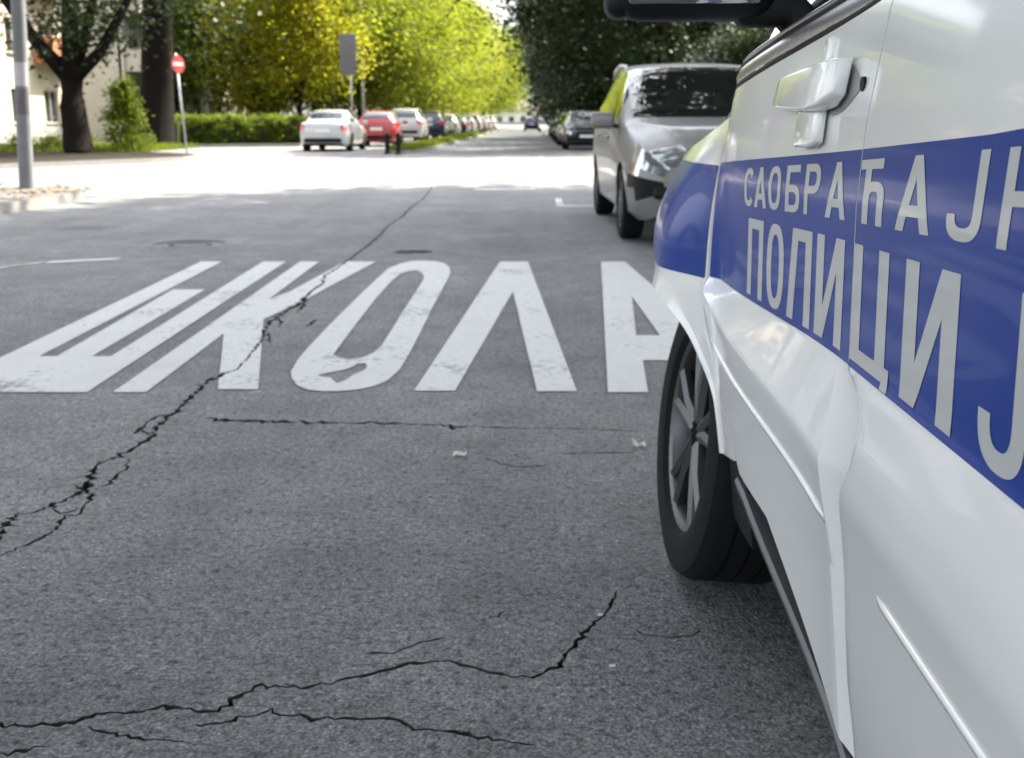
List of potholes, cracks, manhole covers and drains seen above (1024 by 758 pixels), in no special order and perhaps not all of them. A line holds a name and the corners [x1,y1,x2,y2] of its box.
manhole cover [147,239,232,249]
crack [0,591,617,746]
crack [637,629,700,639]
crack [0,187,631,556]
